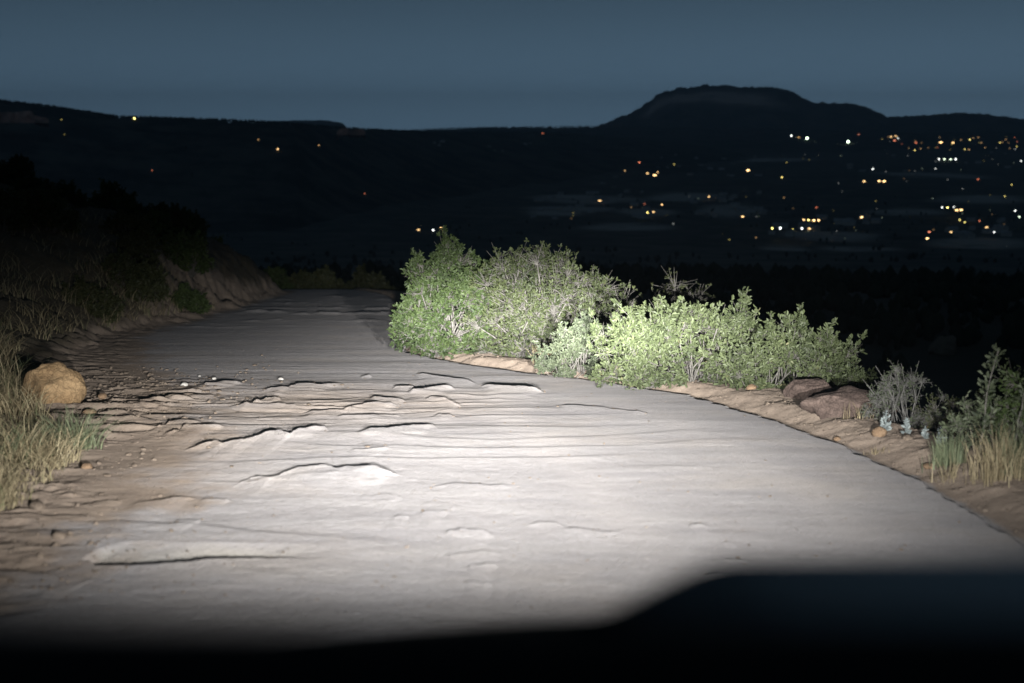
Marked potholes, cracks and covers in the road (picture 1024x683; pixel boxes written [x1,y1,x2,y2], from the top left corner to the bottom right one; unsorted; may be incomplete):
crack [30,372,653,597]
